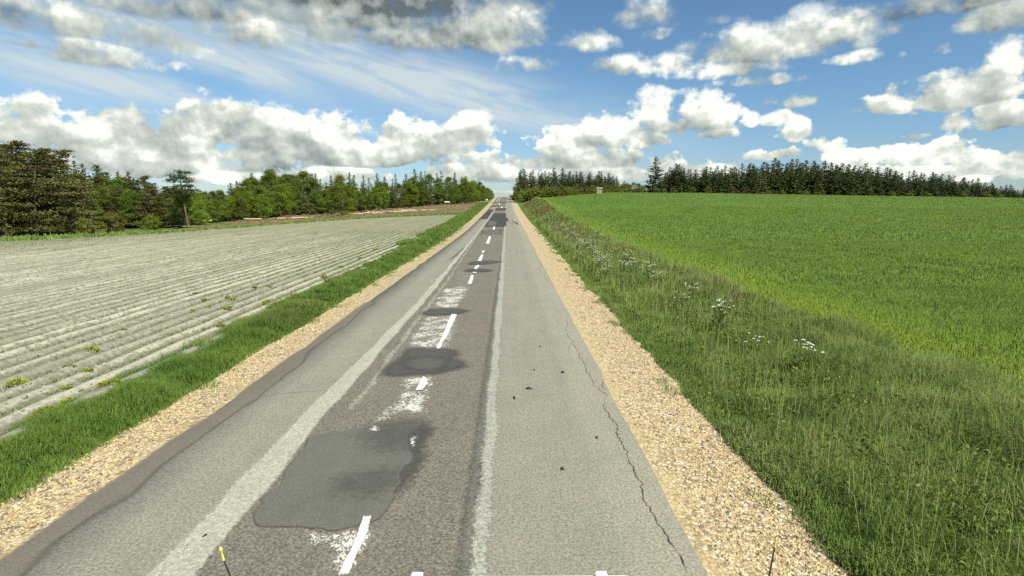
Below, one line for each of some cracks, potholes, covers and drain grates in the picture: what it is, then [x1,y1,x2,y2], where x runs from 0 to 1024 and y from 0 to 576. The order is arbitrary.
crack [543,321,687,568]
